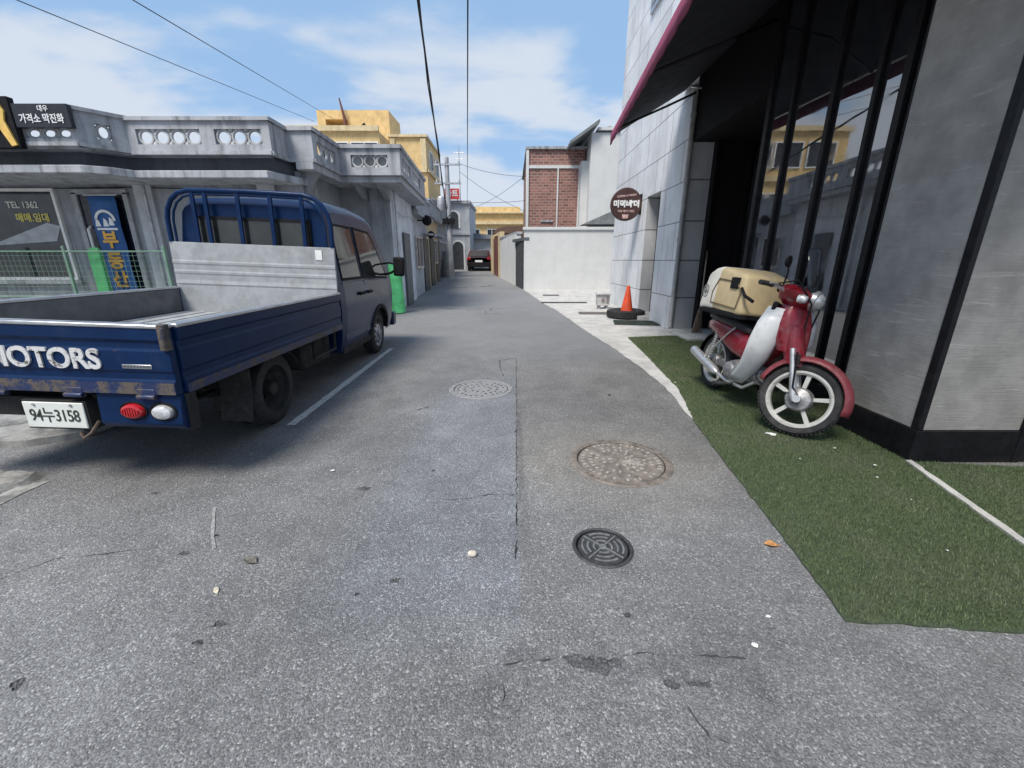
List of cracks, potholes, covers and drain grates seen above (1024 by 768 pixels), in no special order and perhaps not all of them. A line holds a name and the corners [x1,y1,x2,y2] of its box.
crack [1,549,139,579]
manhole cover [570,440,674,488]
manhole cover [449,380,512,399]
crack [687,705,731,768]
crack [504,652,747,686]
